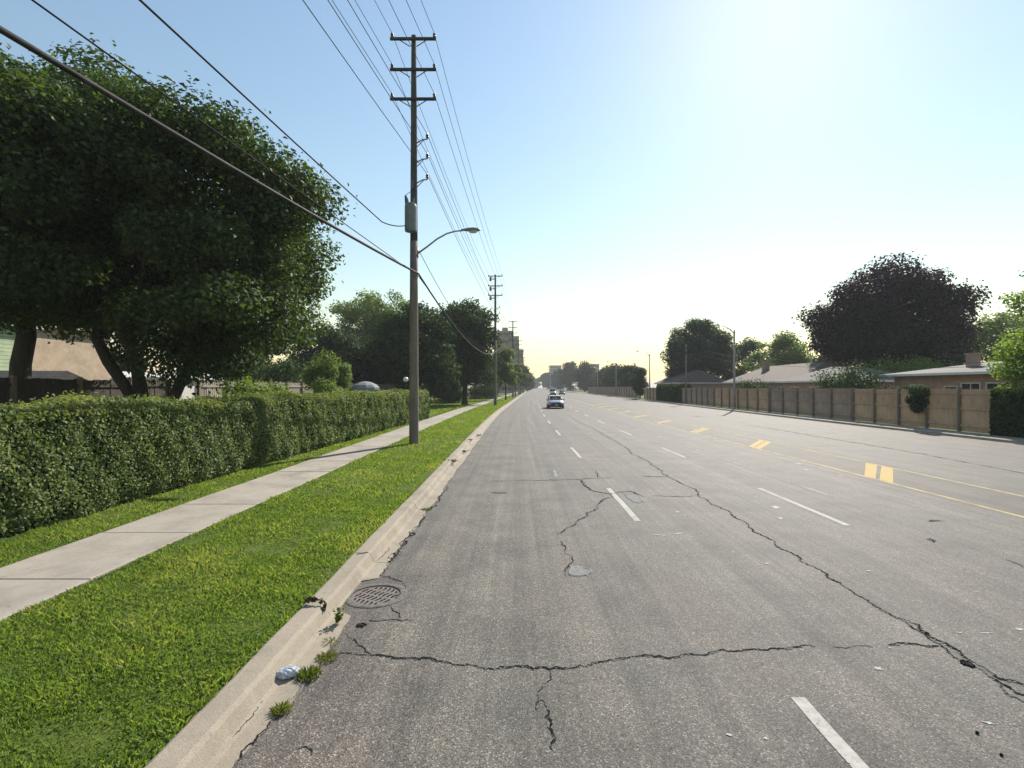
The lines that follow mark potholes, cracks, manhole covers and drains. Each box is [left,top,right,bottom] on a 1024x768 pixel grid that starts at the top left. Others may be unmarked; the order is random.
crack [233,685,302,764]
crack [568,415,1024,702]
crack [534,471,657,575]
crack [369,485,449,621]
crack [334,632,816,749]
drain grate [345,583,407,608]
